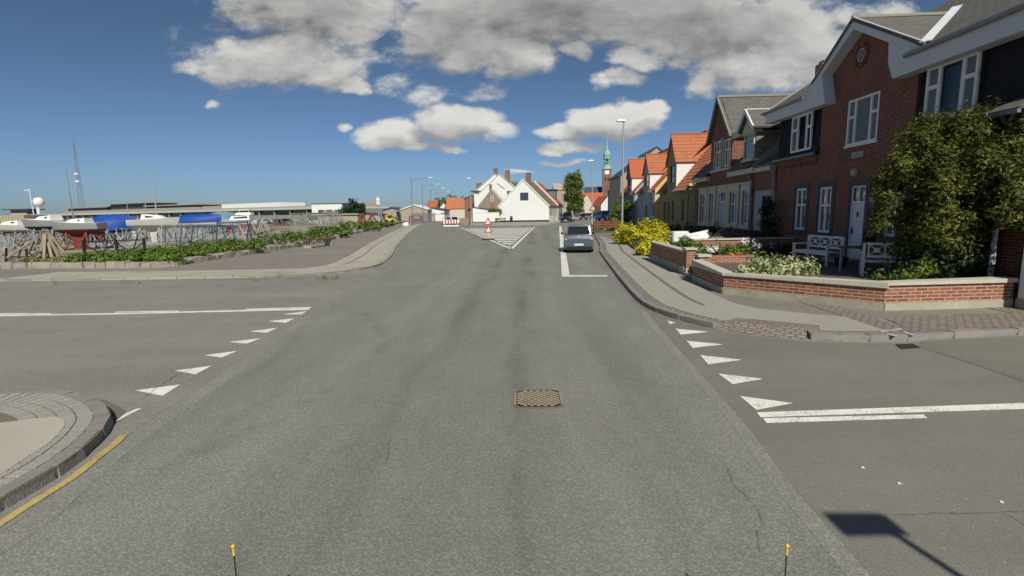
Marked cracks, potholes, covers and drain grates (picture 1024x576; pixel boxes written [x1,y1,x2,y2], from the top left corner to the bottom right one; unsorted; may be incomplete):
manhole cover [514,390,564,409]
